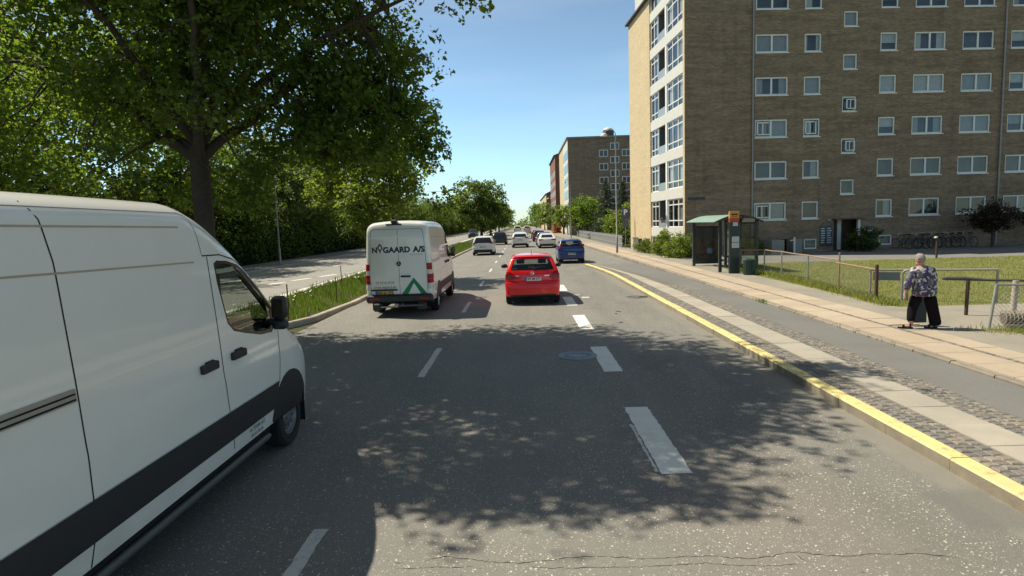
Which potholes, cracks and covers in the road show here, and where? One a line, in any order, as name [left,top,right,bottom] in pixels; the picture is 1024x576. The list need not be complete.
manhole cover [558,351,597,360]
crack [402,552,956,569]
